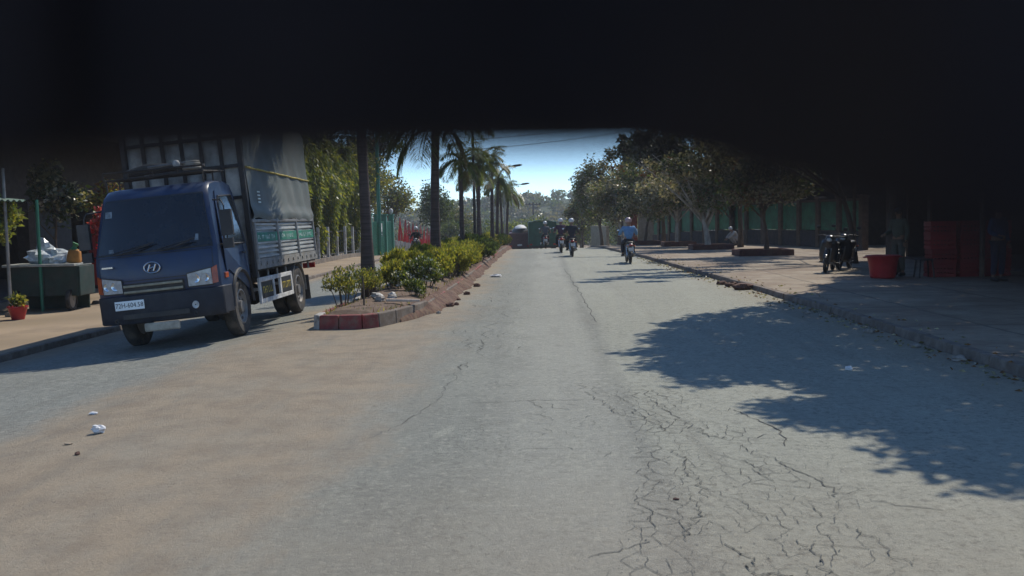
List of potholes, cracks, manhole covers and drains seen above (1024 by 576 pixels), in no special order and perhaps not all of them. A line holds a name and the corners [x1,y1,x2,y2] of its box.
crack [578,380,914,576]
crack [457,399,610,463]
crack [375,271,521,436]
